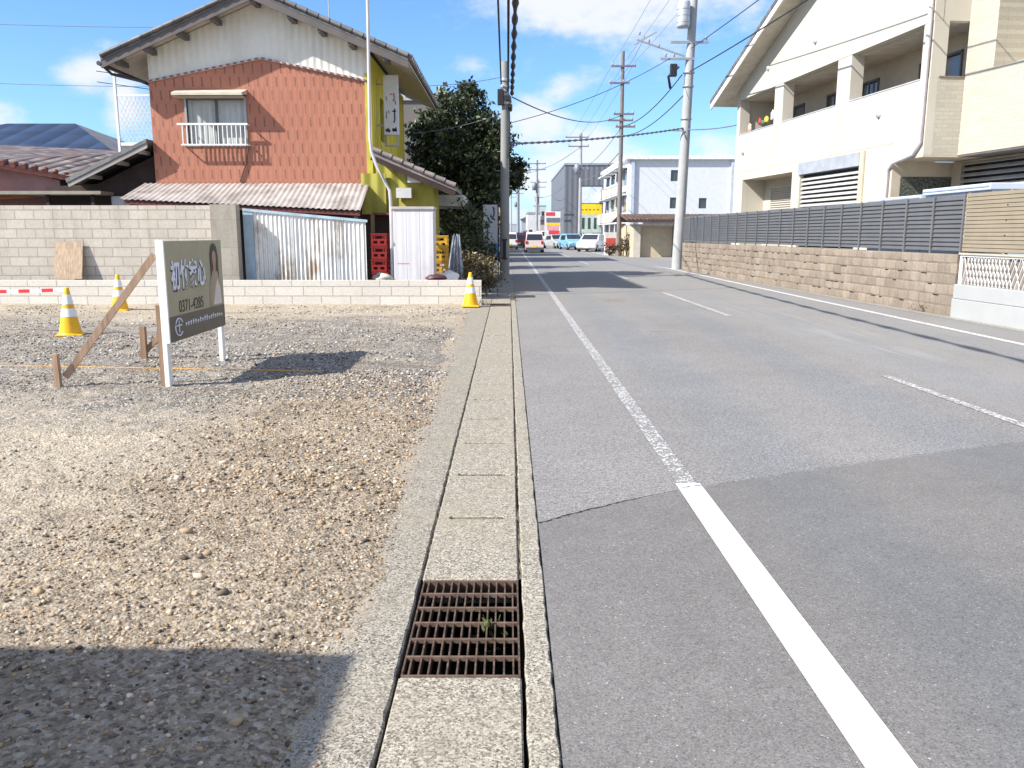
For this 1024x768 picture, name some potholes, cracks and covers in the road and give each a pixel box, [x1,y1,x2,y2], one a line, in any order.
drain grate [400,580,521,678]
